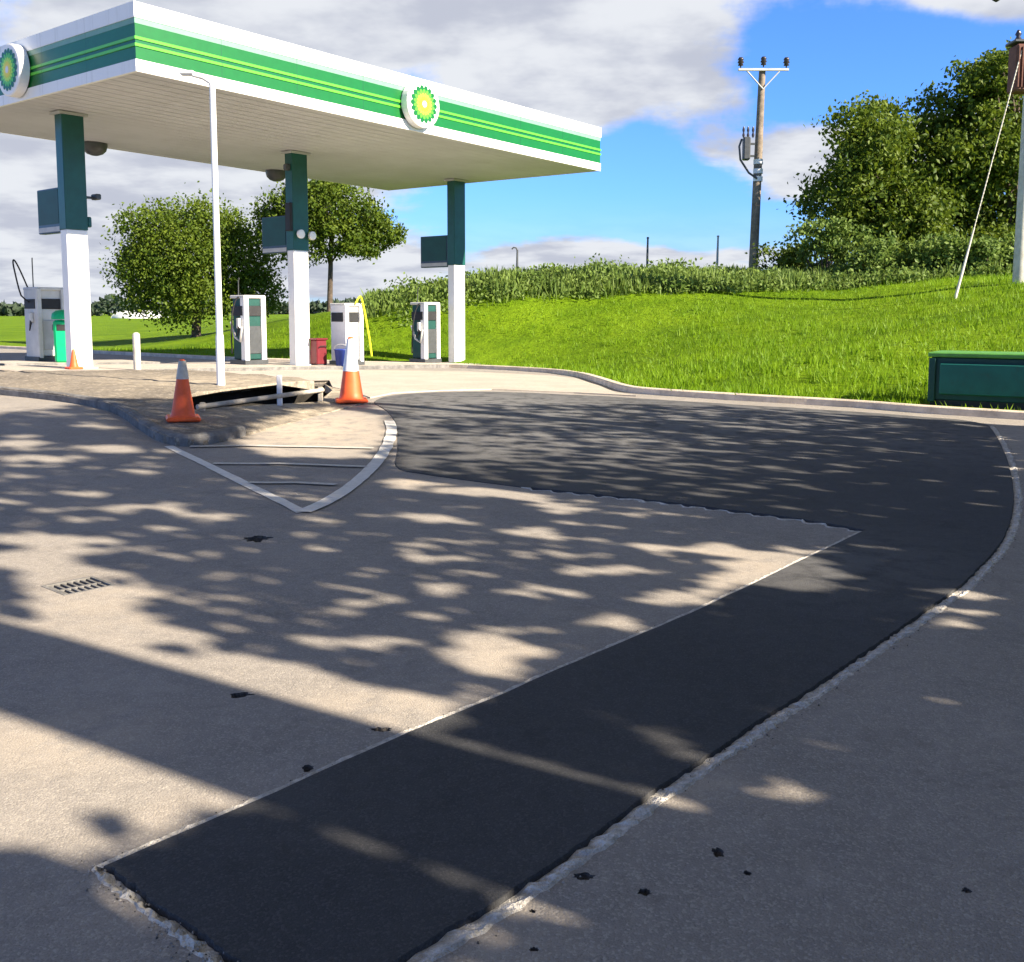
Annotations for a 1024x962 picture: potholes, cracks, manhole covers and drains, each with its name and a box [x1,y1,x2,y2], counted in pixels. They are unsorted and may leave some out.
pothole [573,872,595,880]
drain grate [42,576,115,596]
